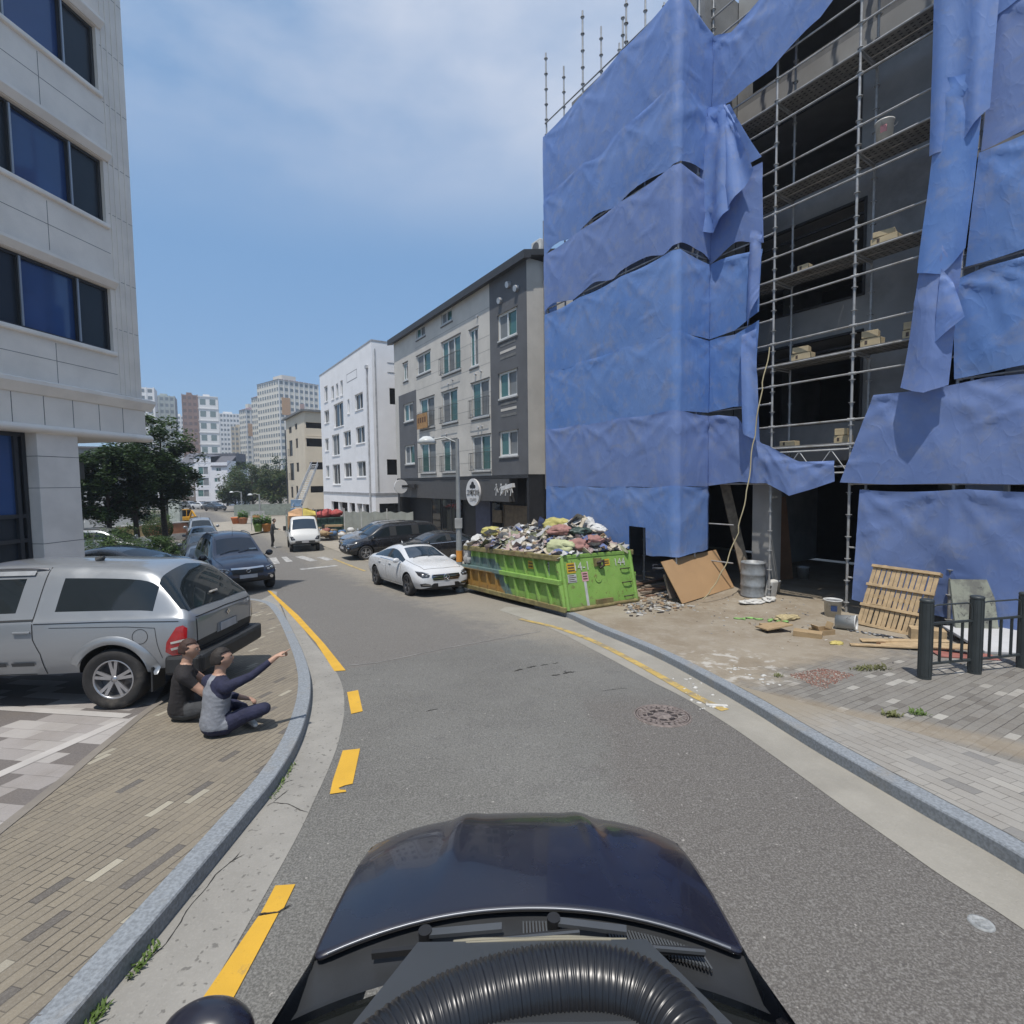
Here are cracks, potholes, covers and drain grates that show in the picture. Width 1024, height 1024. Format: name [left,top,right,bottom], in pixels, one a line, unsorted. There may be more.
manhole cover [634,704,692,728]
crack [151,851,241,956]
utility cover [967,914,996,933]
